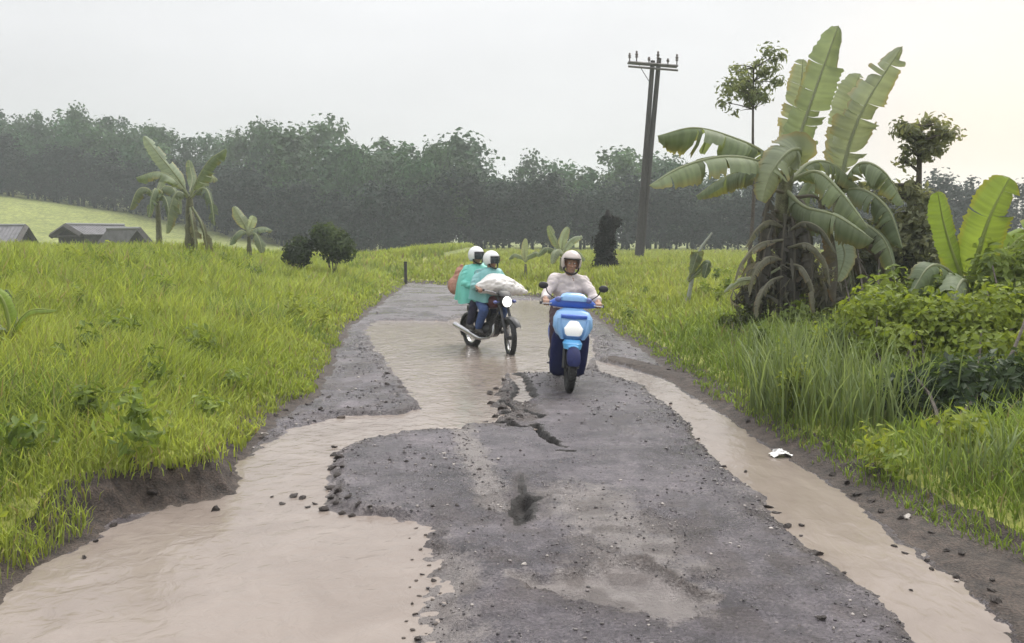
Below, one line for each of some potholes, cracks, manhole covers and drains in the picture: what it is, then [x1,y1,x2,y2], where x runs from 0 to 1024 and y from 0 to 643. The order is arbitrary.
pothole [508,473,544,526]
pothole [359,297,608,426]
crack [495,389,577,452]
pothole [507,553,727,622]
pothole [67,499,465,643]
